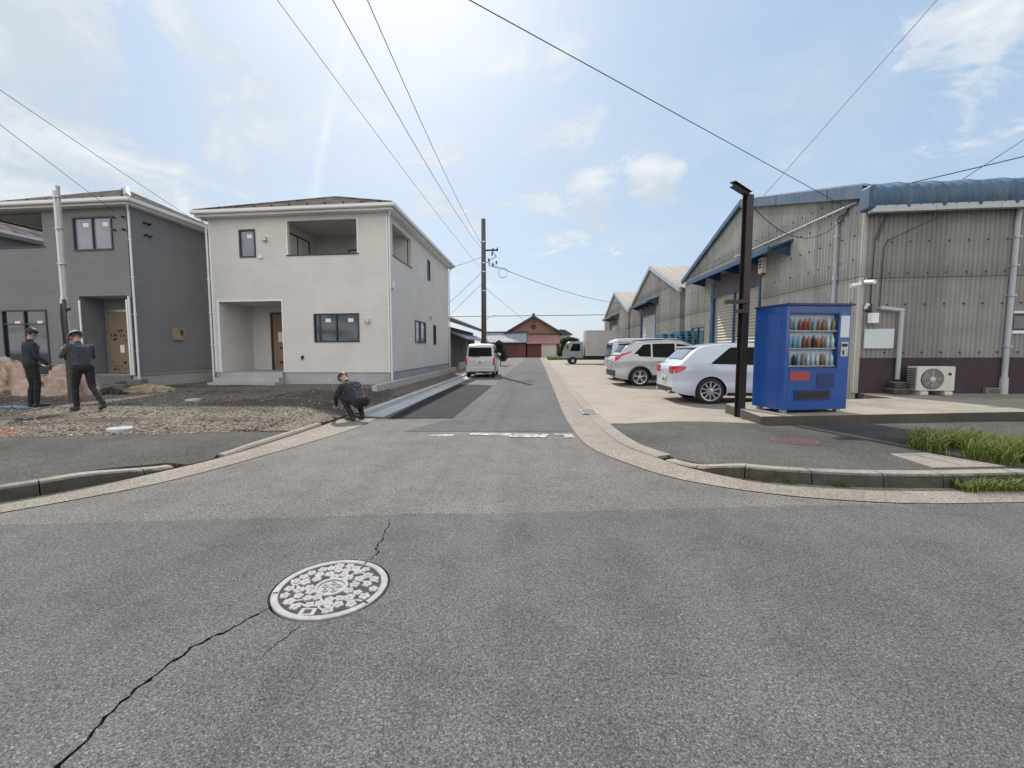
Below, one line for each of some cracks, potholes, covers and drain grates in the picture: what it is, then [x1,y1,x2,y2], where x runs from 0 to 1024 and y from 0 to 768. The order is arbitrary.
manhole cover [770,436,821,445]
crack [53,607,302,768]
manhole cover [267,559,390,622]
